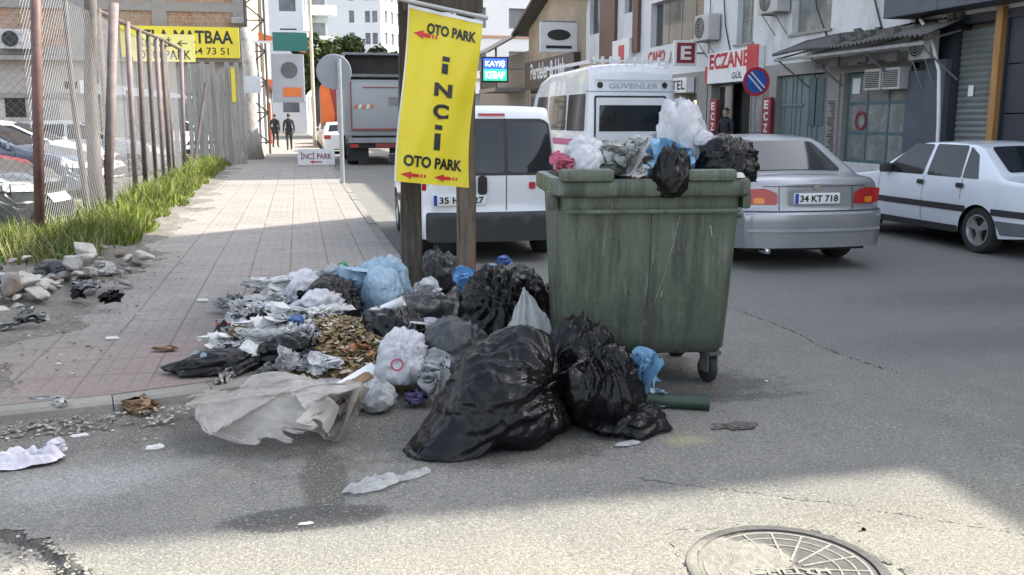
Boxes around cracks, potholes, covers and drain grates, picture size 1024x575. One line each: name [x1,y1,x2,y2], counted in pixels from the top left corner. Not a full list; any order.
manhole cover [686,525,892,575]
crack [738,310,884,369]
